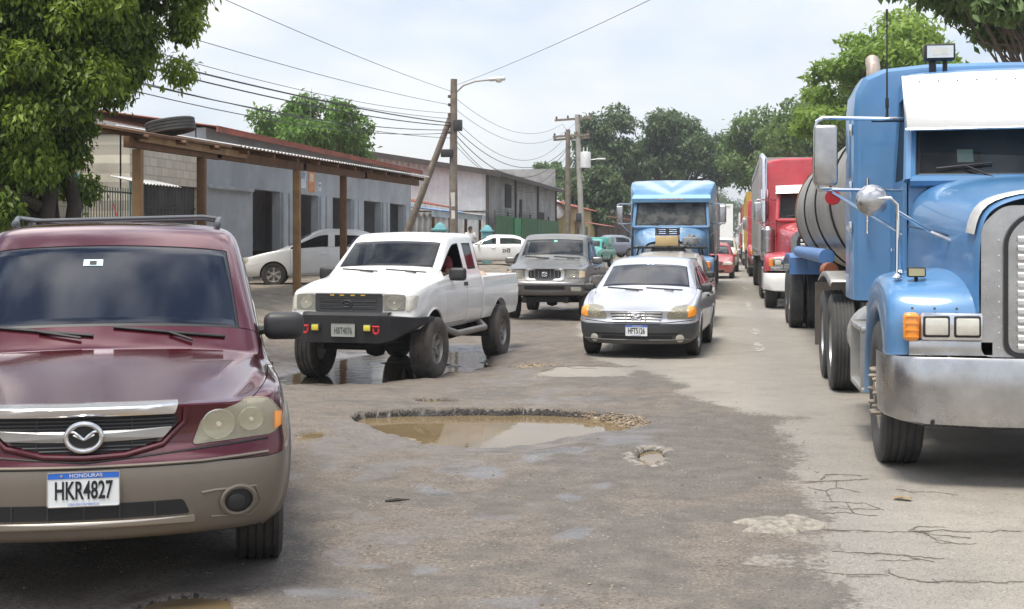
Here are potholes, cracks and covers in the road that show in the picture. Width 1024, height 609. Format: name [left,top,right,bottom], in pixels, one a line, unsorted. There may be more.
pothole [342,406,667,450]
pothole [500,360,571,369]
pothole [114,591,249,609]
crack [808,474,1024,583]
pothole [625,445,678,467]
